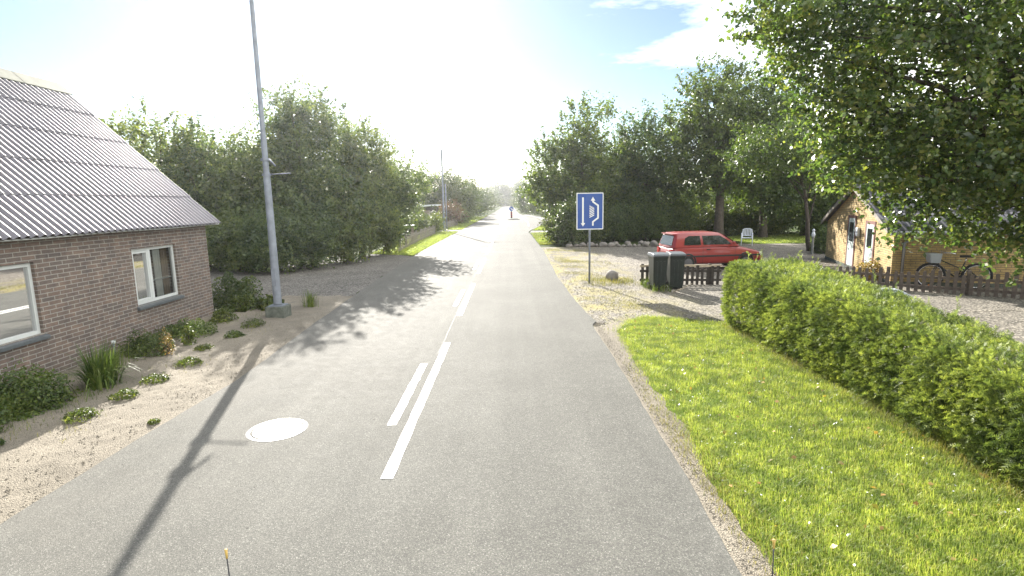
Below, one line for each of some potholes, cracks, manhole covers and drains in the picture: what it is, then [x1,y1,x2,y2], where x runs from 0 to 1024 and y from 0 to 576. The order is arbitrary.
manhole cover [245,418,308,442]
